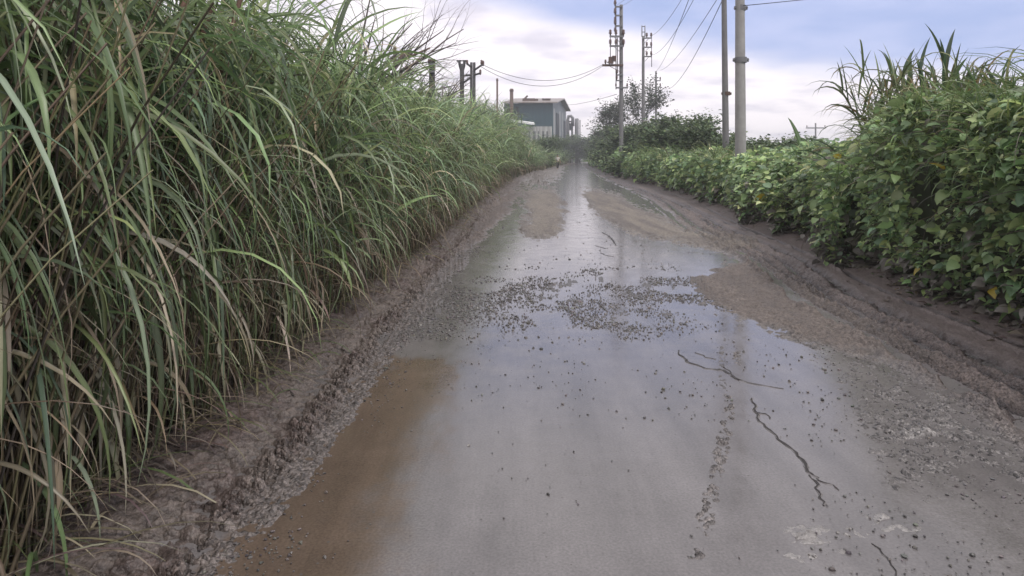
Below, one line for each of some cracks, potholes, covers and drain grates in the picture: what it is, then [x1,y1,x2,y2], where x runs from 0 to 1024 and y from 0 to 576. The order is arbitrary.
crack [678,350,897,576]
